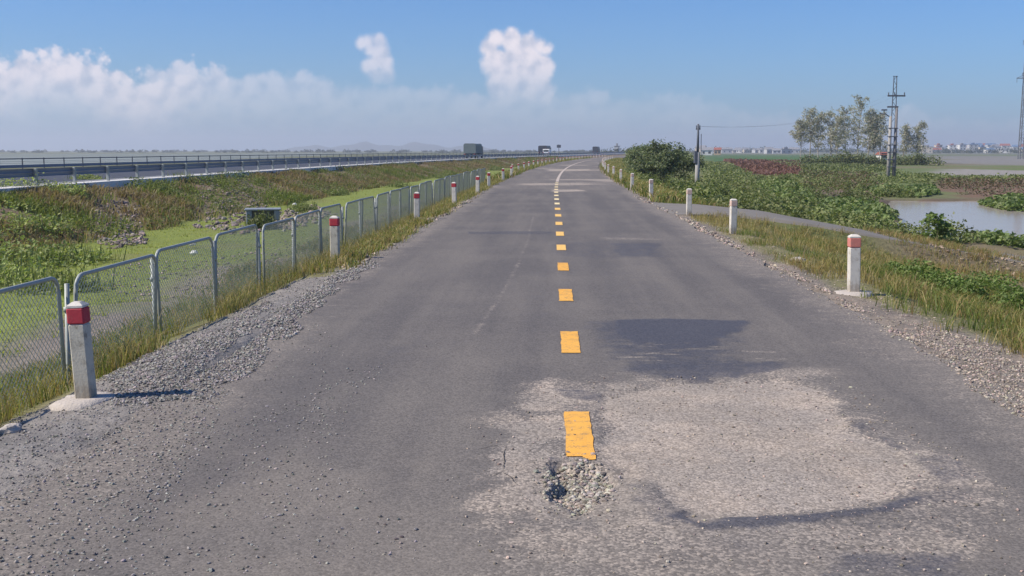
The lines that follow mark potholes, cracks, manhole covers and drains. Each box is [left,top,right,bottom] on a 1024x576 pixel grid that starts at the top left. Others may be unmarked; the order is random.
pothole [532,451,624,520]
